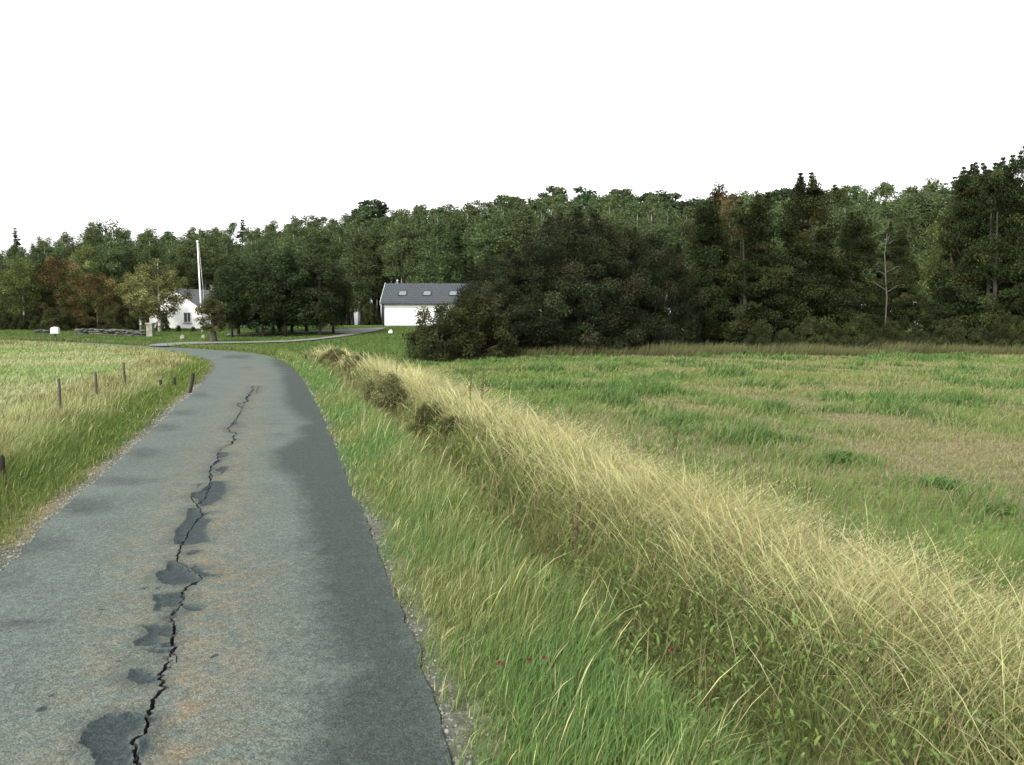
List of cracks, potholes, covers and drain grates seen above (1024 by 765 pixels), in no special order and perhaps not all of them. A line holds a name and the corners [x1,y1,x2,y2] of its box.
crack [129,386,258,765]
